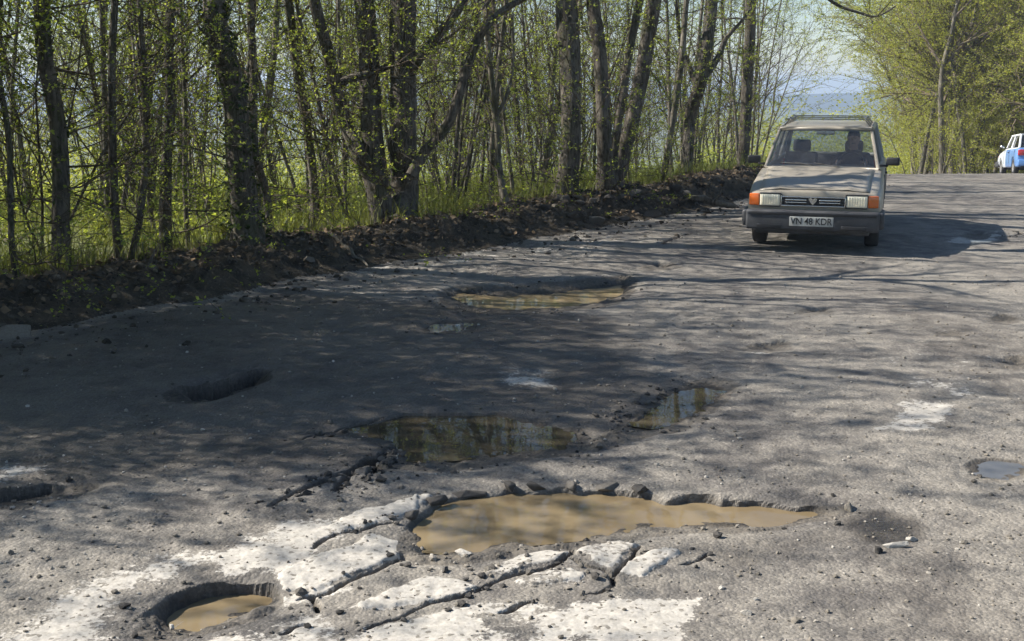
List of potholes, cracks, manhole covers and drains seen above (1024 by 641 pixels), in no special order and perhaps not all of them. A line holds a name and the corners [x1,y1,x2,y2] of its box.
crack [269,453,383,506]
pothole [437,275,641,315]
pothole [0,481,100,511]
pothole [134,582,286,641]
pothole [418,318,482,335]
pothole [324,411,591,473]
pothole [574,376,744,453]
crack [280,557,403,635]
pothole [395,486,856,566]
crack [312,521,393,549]
pothole [963,457,1024,483]
pothole [161,369,274,404]
